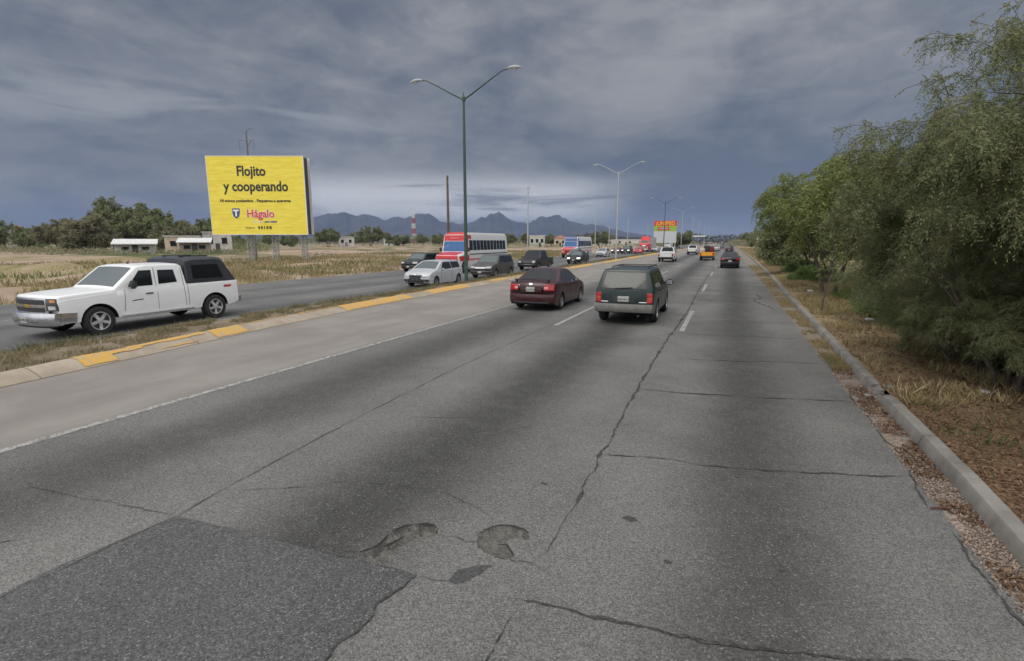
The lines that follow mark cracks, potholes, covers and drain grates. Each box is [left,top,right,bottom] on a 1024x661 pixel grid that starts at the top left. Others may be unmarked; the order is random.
crack [24,484,172,515]
crack [517,598,957,661]
pothole [360,522,438,563]
crack [605,395,927,505]
crack [692,294,798,339]
pothole [476,524,531,560]
